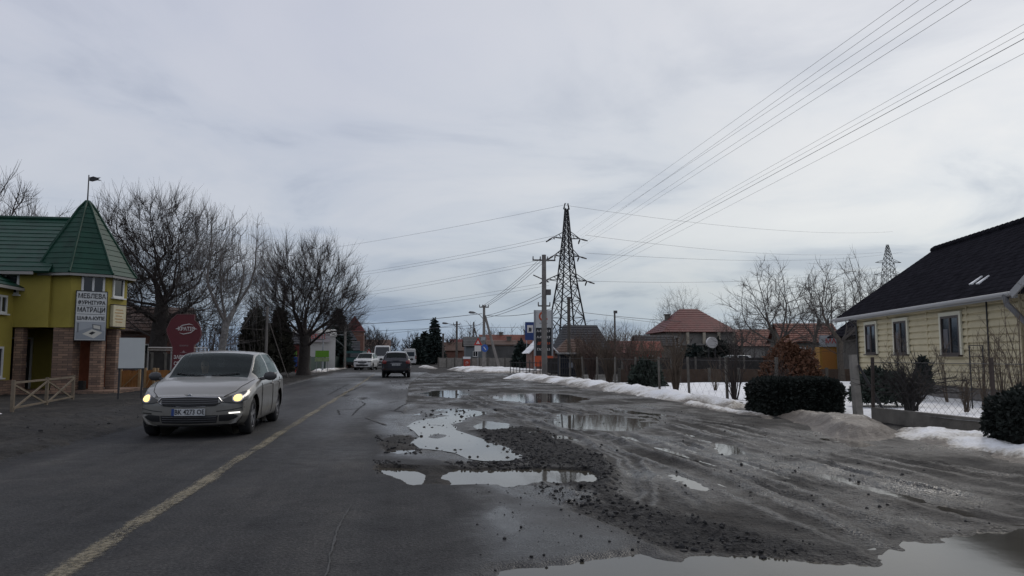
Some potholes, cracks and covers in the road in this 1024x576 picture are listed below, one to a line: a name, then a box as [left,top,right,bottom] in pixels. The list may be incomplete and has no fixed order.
pothole [372,463,604,487]
crack [329,383,407,425]
